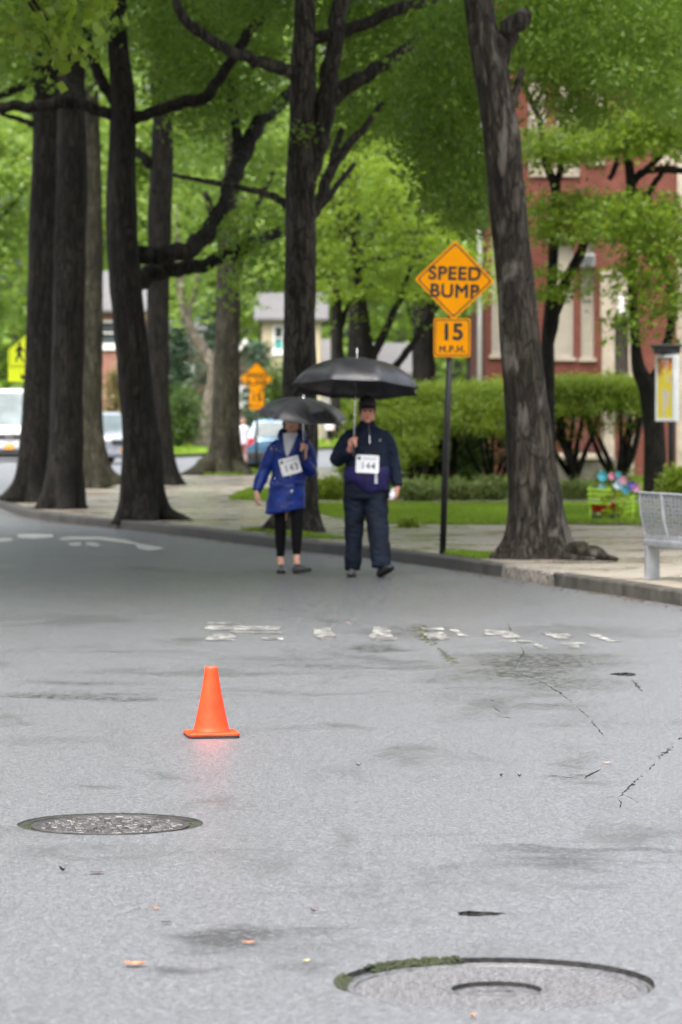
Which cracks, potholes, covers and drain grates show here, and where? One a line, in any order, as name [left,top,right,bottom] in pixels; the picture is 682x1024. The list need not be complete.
crack [605,737,682,807]
manhole cover [333,955,655,1011]
crack [492,624,603,735]
manhole cover [17,813,203,835]
